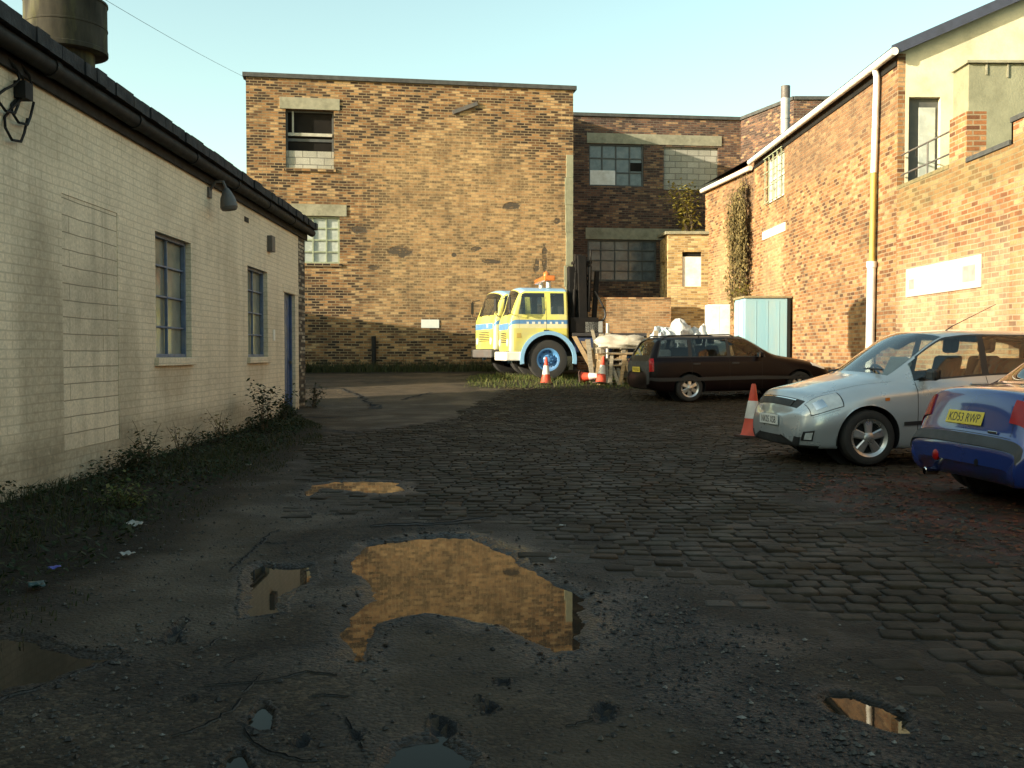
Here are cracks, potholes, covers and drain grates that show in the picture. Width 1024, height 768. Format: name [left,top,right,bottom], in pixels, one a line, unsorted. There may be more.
pothole [808,686,923,736]
pothole [367,732,490,768]
crack [229,529,287,572]
crack [171,636,349,762]
crack [322,388,374,406]
pothole [296,479,415,498]
pothole [0,629,134,698]
crack [345,717,363,748]
pothole [235,559,323,619]
pothole [236,696,283,733]
pothole [325,531,603,664]
